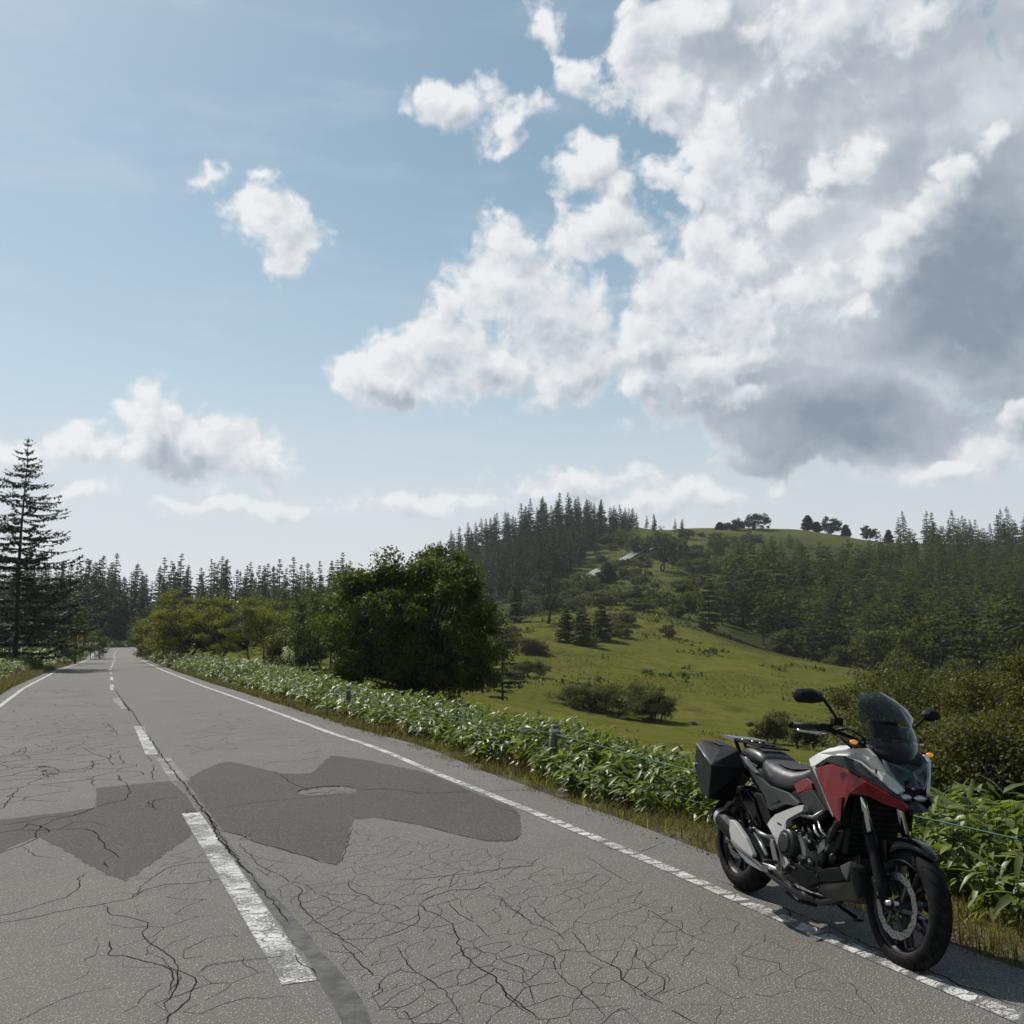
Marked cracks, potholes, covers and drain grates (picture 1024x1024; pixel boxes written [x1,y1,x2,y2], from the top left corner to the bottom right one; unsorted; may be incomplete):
crack [603,846,1023,1008]
crack [179,710,517,807]
crack [1,849,317,1024]
crack [0,715,191,869]
crack [0,687,108,712]
crack [239,831,875,1024]
